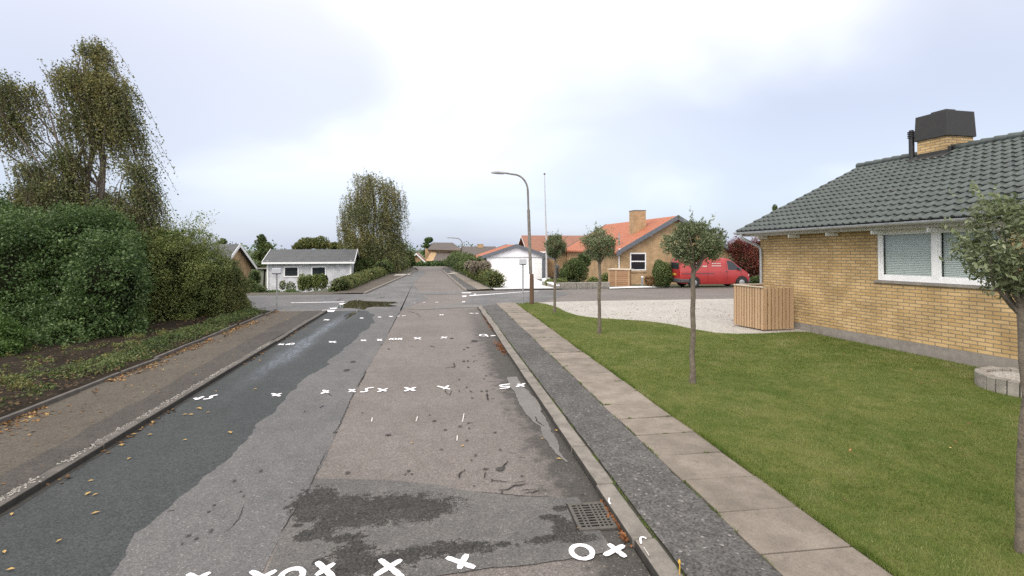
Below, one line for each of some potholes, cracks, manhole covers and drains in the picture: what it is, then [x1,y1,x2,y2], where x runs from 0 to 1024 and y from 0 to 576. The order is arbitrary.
drain grate [566,501,618,531]
